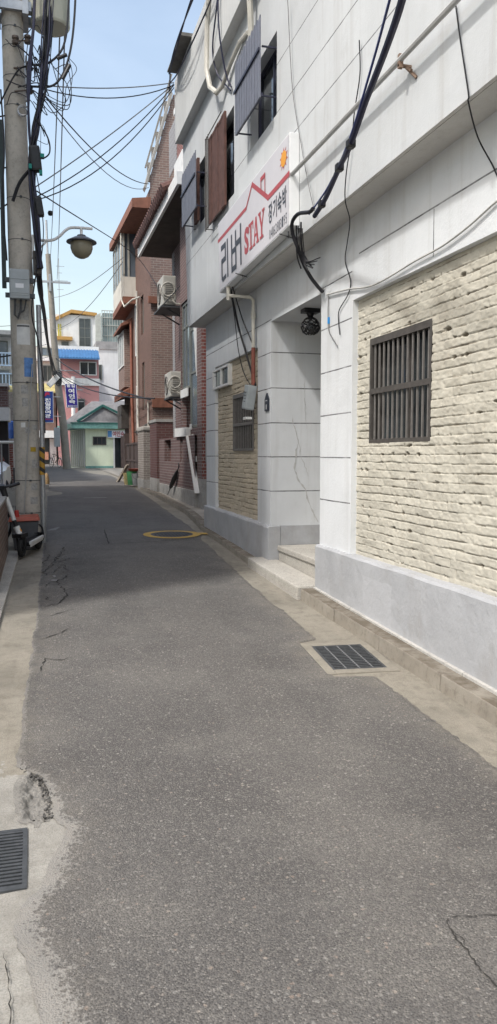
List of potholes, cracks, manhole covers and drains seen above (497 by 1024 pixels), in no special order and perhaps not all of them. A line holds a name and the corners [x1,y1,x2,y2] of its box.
drain grate [0,827,28,894]
pothole [13,767,55,828]
drain grate [301,641,400,675]
crack [446,914,497,986]
crack [41,547,87,639]
crack [3,955,12,1024]
